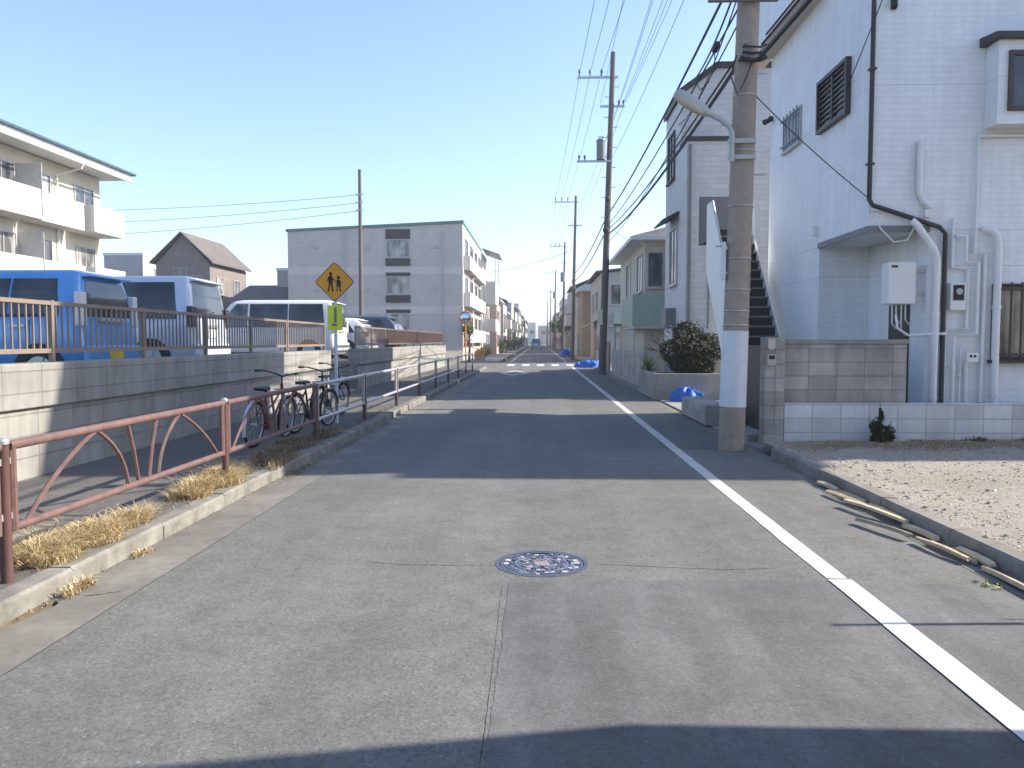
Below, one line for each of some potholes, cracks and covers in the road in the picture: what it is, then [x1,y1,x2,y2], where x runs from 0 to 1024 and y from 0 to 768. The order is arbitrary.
crack [479,588,502,768]
manhole cover [495,551,588,577]
